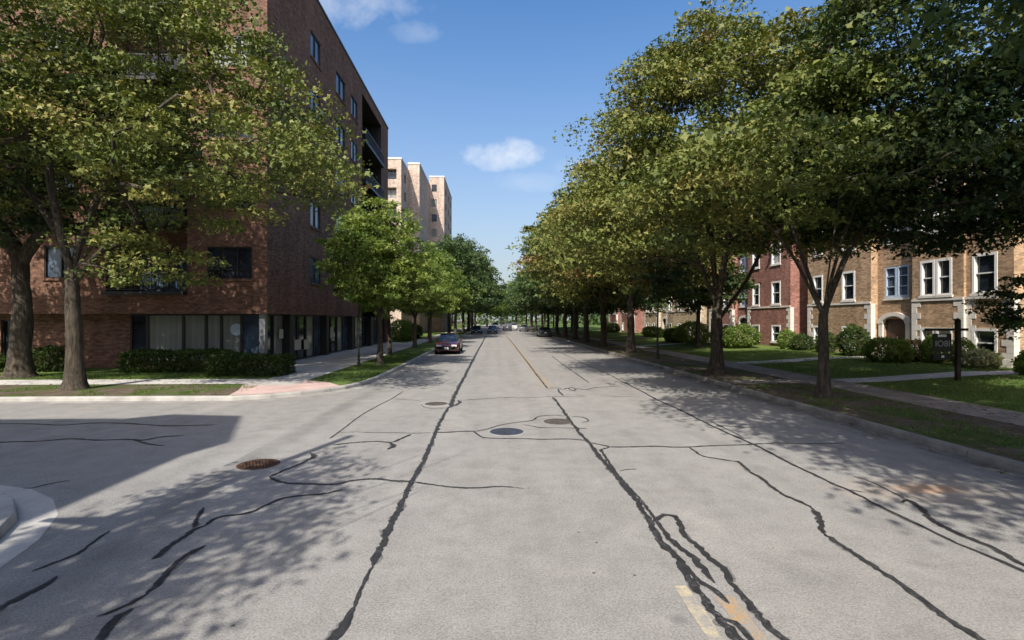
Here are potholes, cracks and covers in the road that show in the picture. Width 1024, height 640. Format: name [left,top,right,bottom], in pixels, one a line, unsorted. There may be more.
manhole cover [236,459,280,470]
manhole cover [488,428,526,437]
crack [473,416,845,452]
crack [0,422,217,446]
